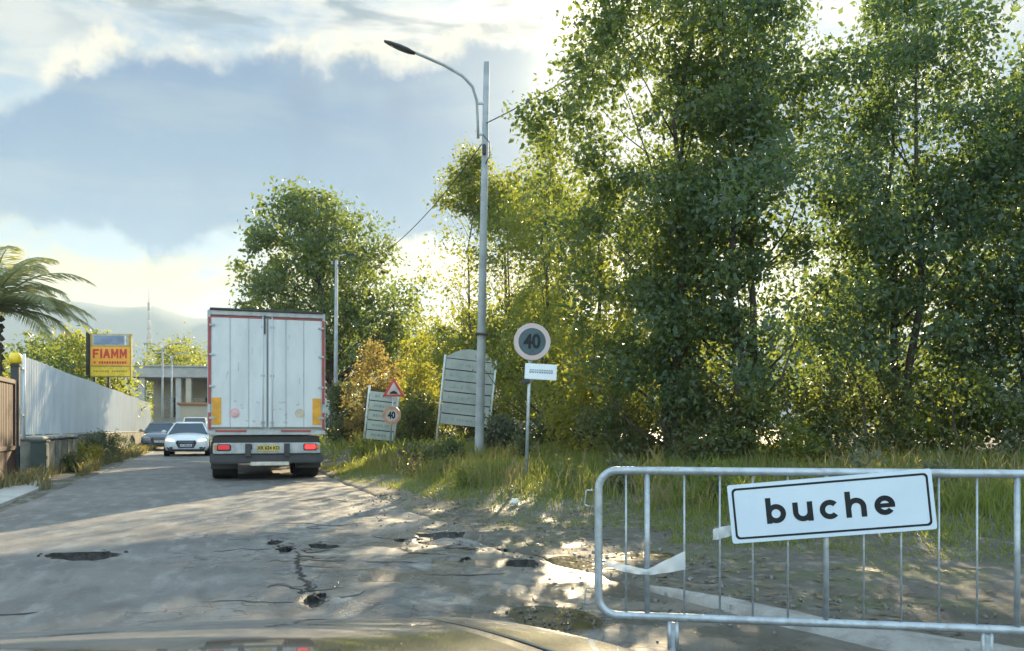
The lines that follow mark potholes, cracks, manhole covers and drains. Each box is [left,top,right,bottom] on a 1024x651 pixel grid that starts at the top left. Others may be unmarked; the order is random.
pothole [32,549,134,563]
pothole [494,556,551,569]
crack [201,522,504,606]
pothole [404,531,507,550]
pothole [292,541,351,550]
pothole [256,538,295,547]
